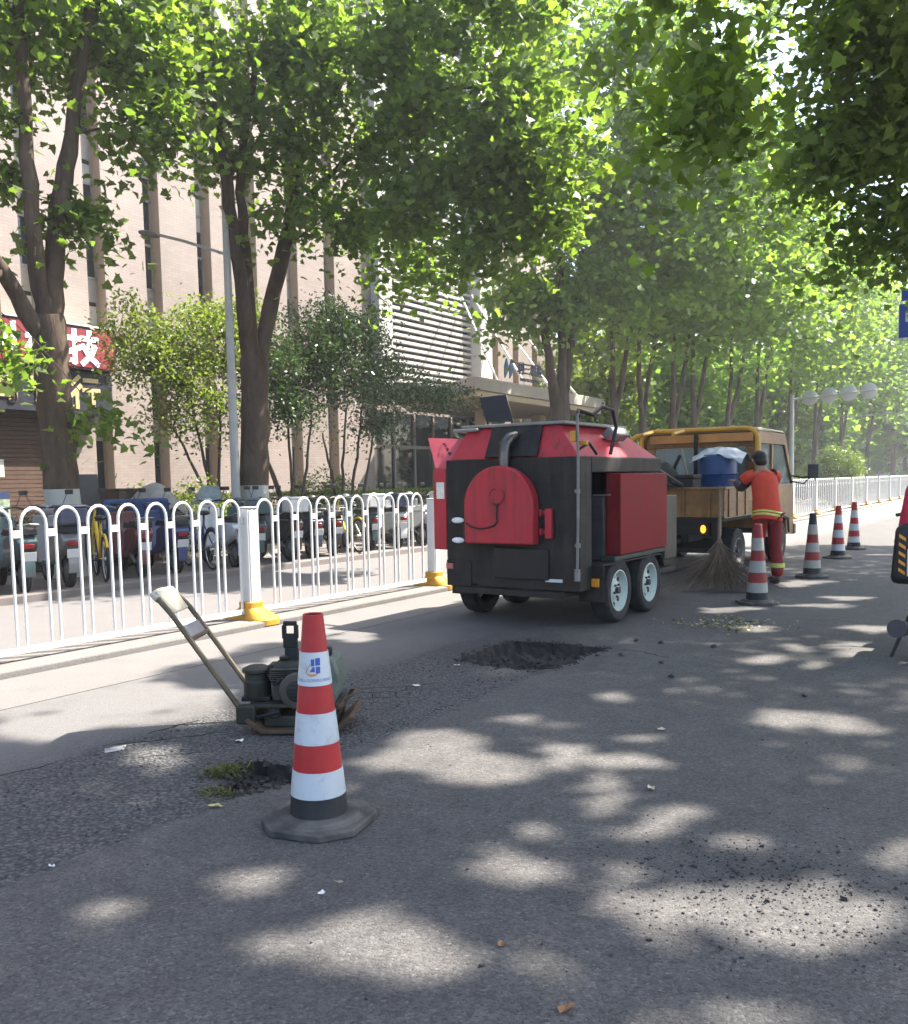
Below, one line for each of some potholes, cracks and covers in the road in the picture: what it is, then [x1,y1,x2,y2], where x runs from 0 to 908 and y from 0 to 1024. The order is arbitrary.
pothole [216,758,293,801]
pothole [454,638,612,672]
